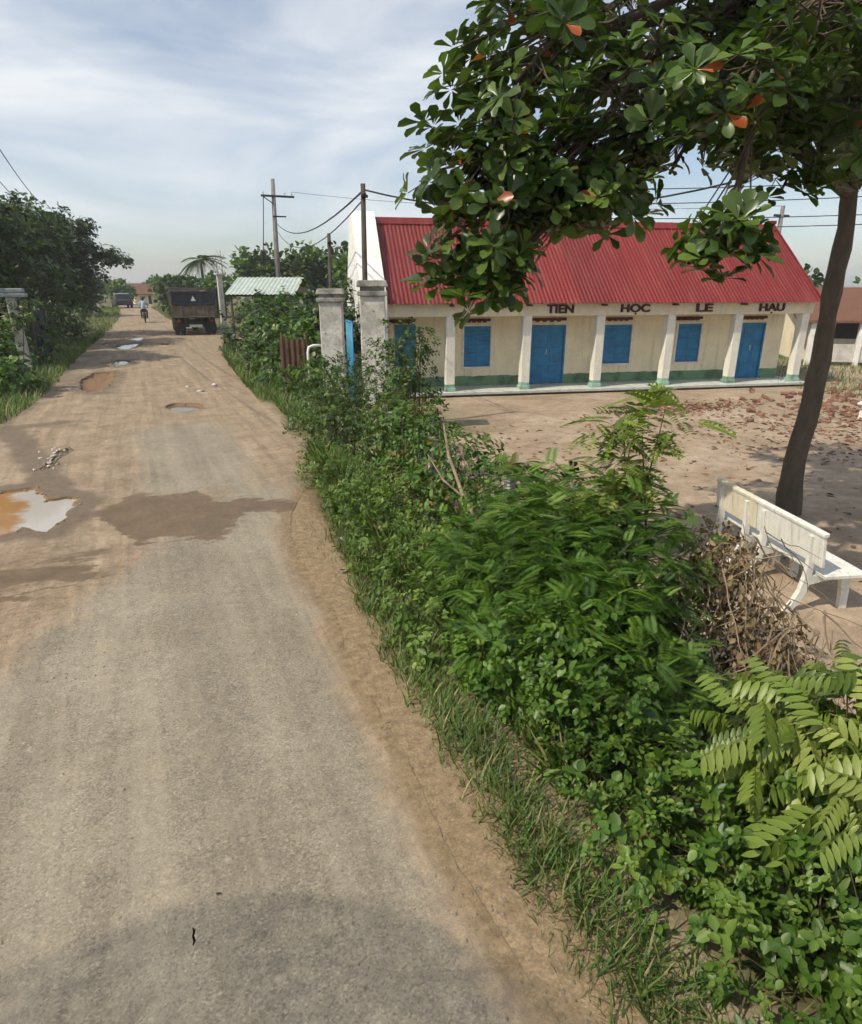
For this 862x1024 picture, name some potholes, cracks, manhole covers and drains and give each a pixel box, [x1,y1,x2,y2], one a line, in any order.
pothole [77,371,117,392]
pothole [39,446,74,471]
pothole [166,403,205,412]
pothole [0,486,82,535]
